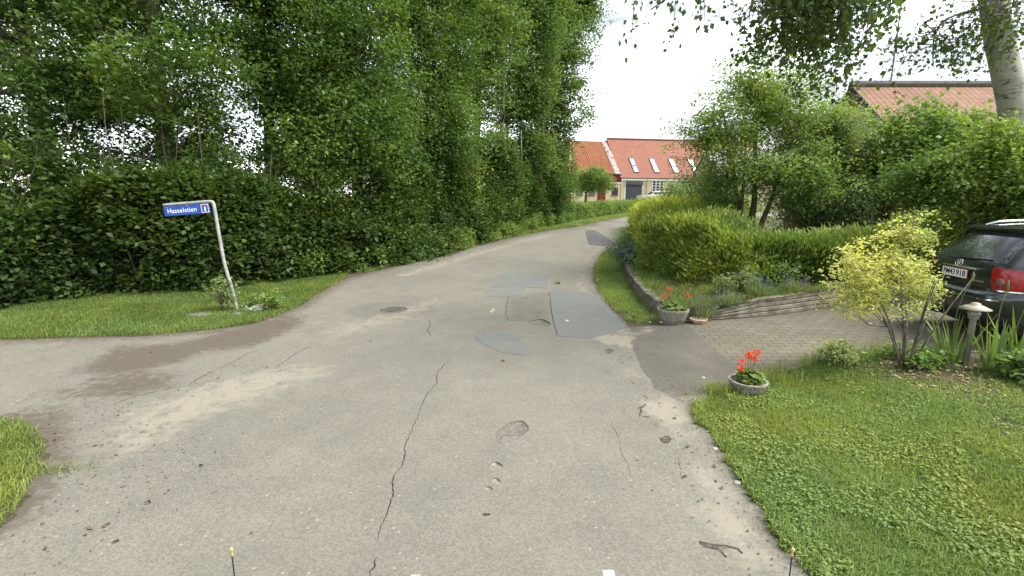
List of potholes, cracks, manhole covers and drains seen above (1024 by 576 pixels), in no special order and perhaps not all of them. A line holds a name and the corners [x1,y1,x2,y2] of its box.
pothole [529,319,550,327]
pothole [496,421,529,445]
crack [378,361,448,540]
